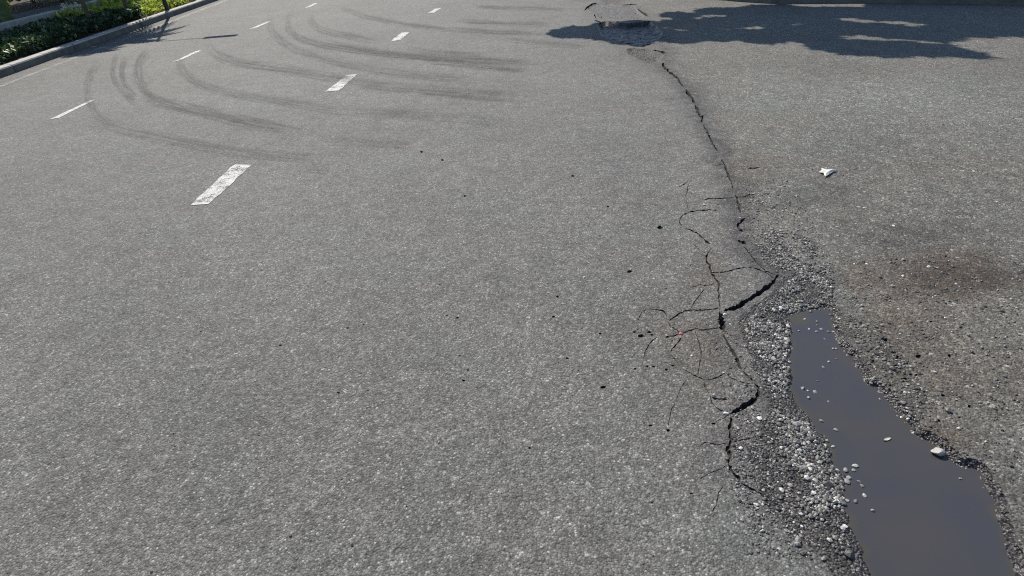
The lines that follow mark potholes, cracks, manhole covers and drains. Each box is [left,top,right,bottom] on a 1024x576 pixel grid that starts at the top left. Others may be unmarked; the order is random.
crack [639,179,779,512]
pothole [738,269,1024,576]
